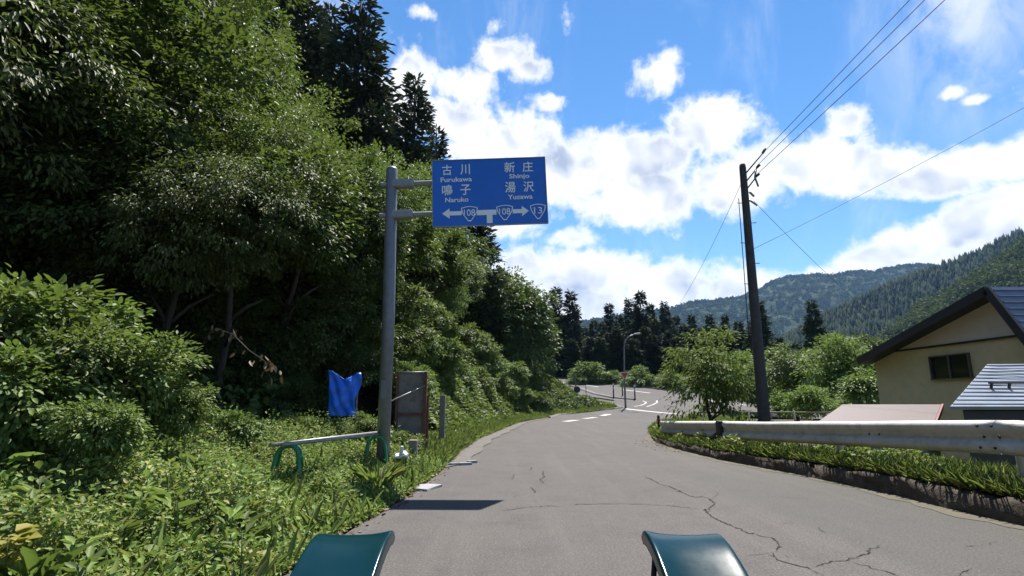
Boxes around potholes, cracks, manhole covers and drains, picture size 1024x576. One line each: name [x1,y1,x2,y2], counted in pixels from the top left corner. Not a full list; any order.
crack [503,469,895,575]
